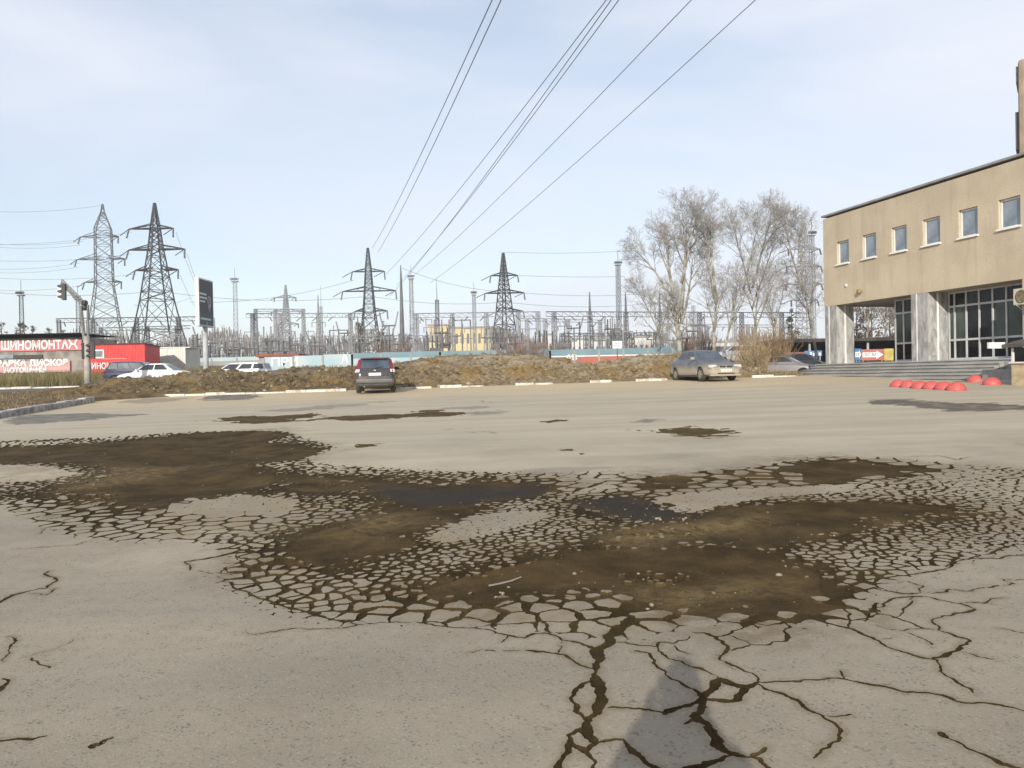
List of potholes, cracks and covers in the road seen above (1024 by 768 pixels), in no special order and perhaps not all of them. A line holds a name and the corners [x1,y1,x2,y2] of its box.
crack [0,431,1024,768]
pothole [280,475,570,508]
pothole [416,545,849,618]
pothole [218,413,321,424]
pothole [280,505,476,568]
pothole [656,425,741,439]
pothole [574,493,709,522]
pothole [592,502,967,551]
pothole [0,430,324,510]
pothole [306,410,465,421]
